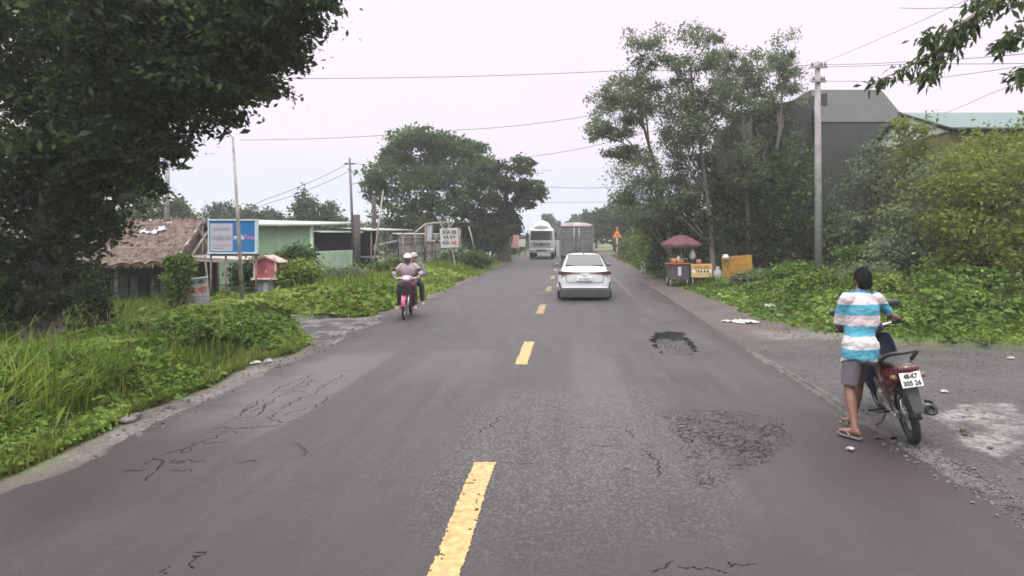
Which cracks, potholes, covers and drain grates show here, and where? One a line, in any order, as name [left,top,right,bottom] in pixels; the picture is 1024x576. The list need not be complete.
crack [188,552,207,569]
crack [122,374,343,481]
crack [582,410,795,490]
crack [652,561,753,574]
pothole [648,331,698,356]
